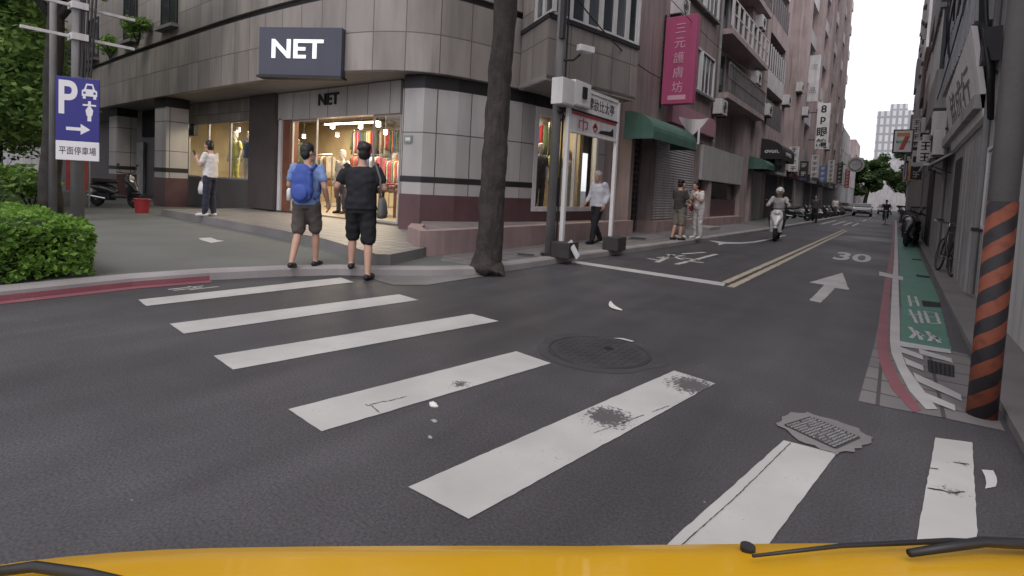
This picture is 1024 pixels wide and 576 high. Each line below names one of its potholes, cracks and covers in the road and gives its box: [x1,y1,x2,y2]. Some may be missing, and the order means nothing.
manhole cover [537,333,670,374]
drain grate [927,360,954,377]
